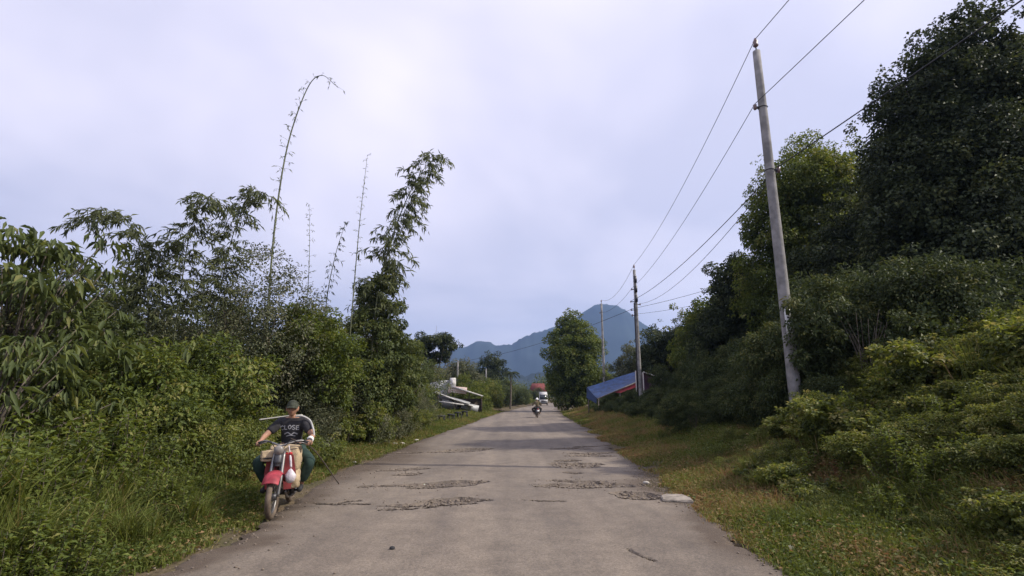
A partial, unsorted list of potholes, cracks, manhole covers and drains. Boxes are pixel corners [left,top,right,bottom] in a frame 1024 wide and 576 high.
pothole [535,479,634,489]
pothole [376,497,493,508]
pothole [356,480,489,489]
pothole [548,459,604,469]
pothole [609,491,661,500]
